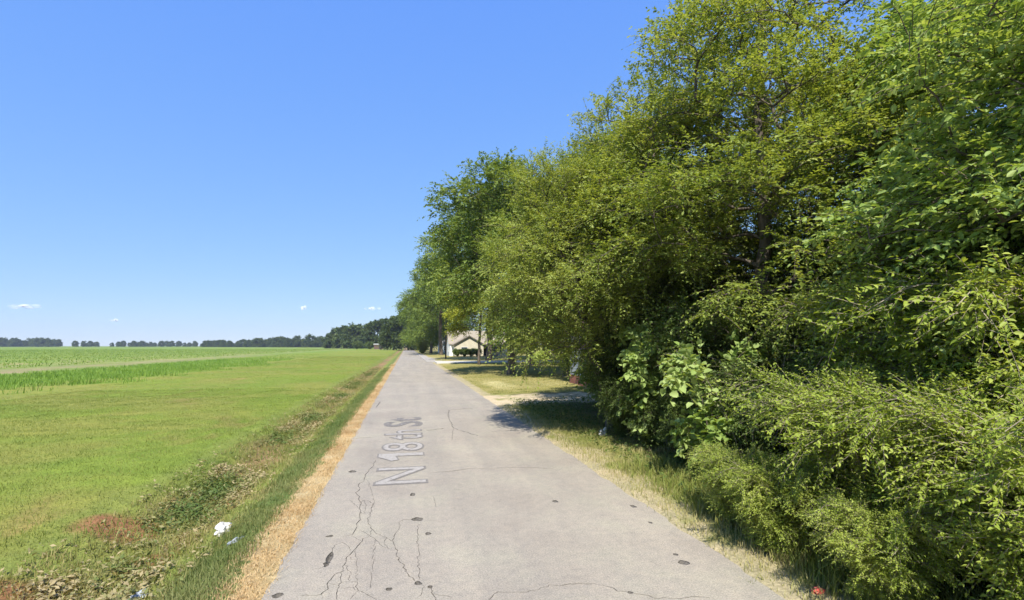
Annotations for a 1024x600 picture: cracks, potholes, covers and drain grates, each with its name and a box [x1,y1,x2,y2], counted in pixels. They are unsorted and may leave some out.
crack [301,460,452,600]
crack [490,583,708,599]
